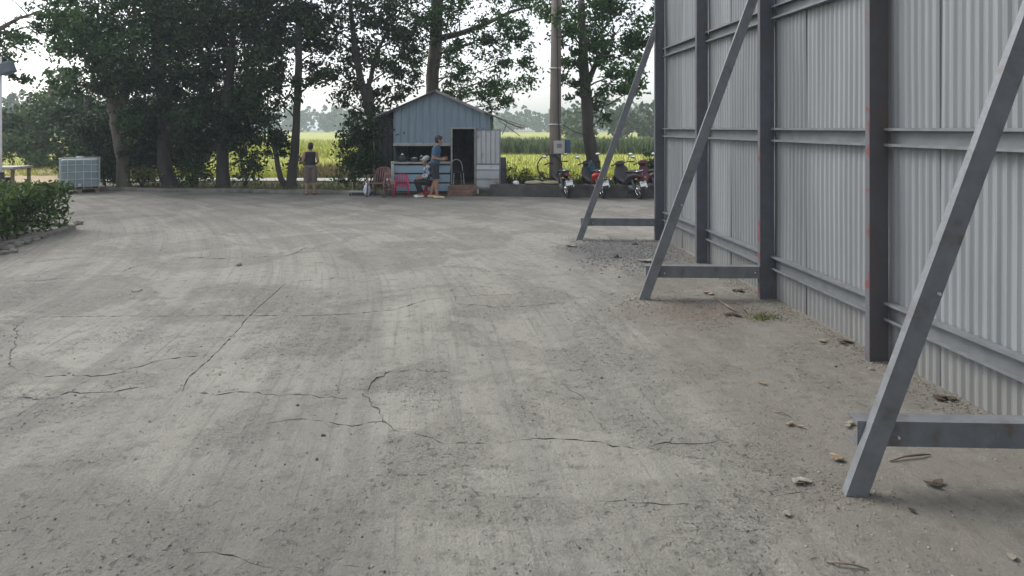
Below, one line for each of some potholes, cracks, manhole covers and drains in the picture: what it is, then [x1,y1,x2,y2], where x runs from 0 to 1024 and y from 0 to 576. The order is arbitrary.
crack [506,387,715,450]
crack [3,277,593,444]
crack [185,551,302,569]
